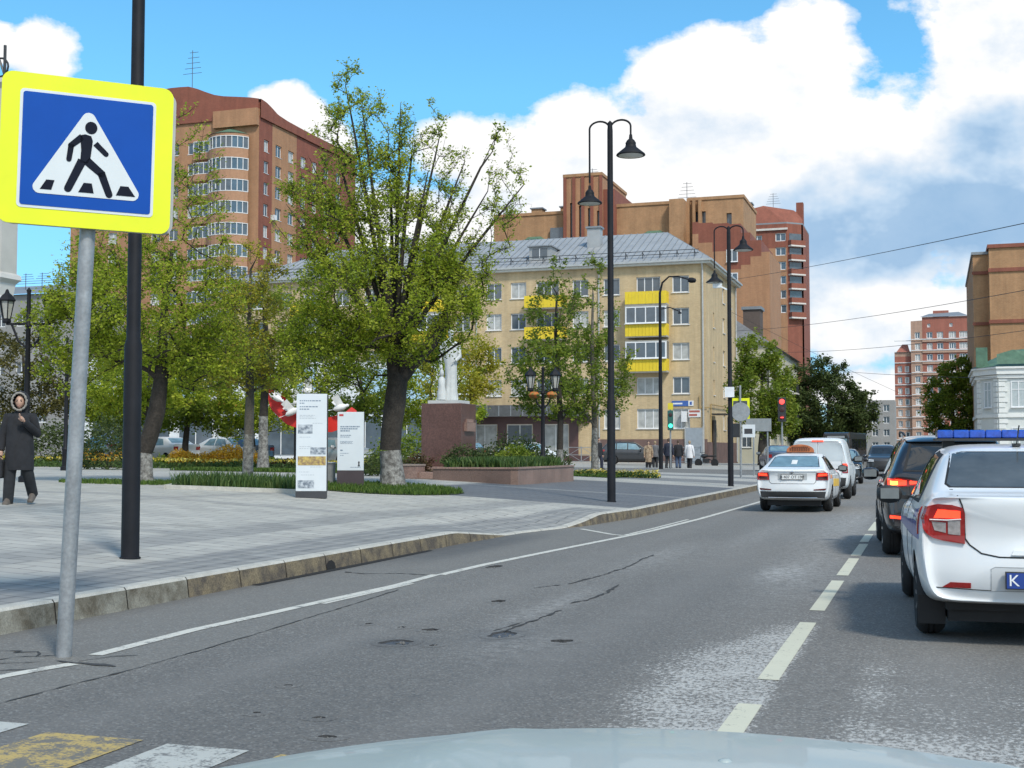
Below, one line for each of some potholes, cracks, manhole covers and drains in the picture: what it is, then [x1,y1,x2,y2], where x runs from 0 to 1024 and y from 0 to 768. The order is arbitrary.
crack [0,650,130,670]
crack [493,554,654,632]
pothole [370,638,423,647]
pothole [478,630,527,639]
pothole [304,732,351,741]
